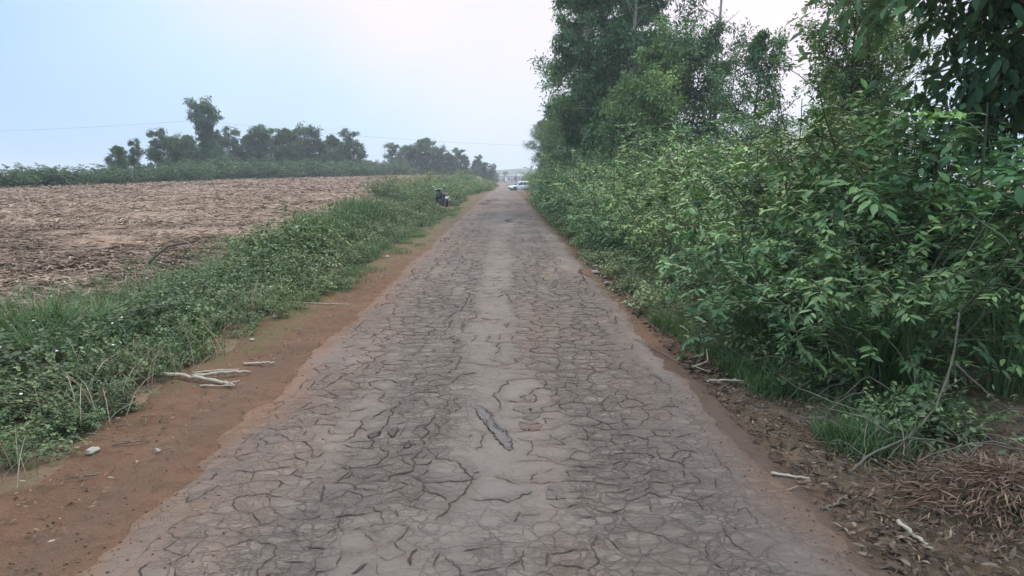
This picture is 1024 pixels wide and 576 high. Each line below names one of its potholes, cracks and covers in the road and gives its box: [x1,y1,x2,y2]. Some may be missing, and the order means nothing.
crack [136,199,783,576]
pothole [474,405,514,451]
